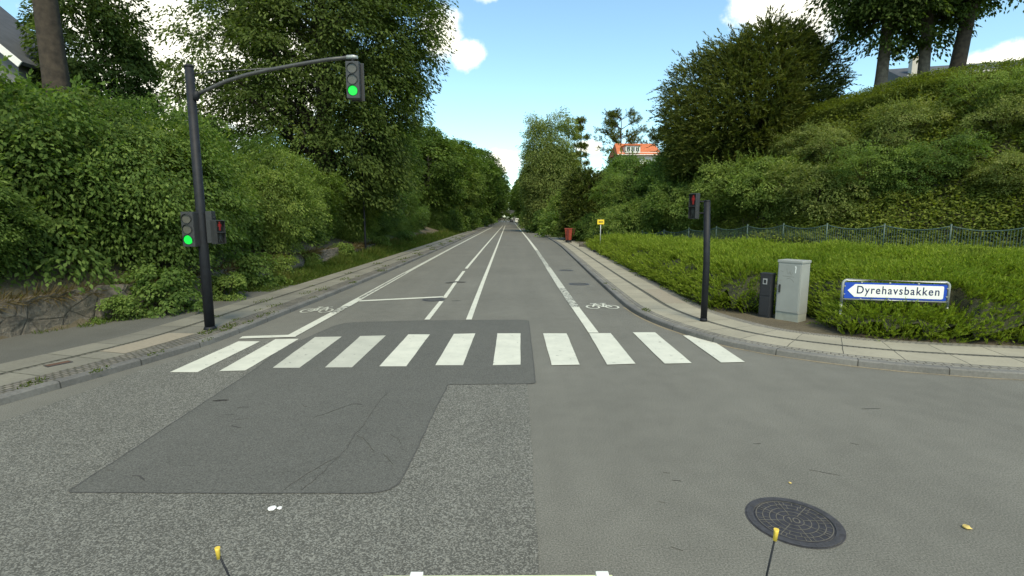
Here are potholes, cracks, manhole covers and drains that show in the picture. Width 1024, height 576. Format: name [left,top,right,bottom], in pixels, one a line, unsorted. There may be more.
manhole cover [745,497,846,549]
crack [285,394,400,491]
